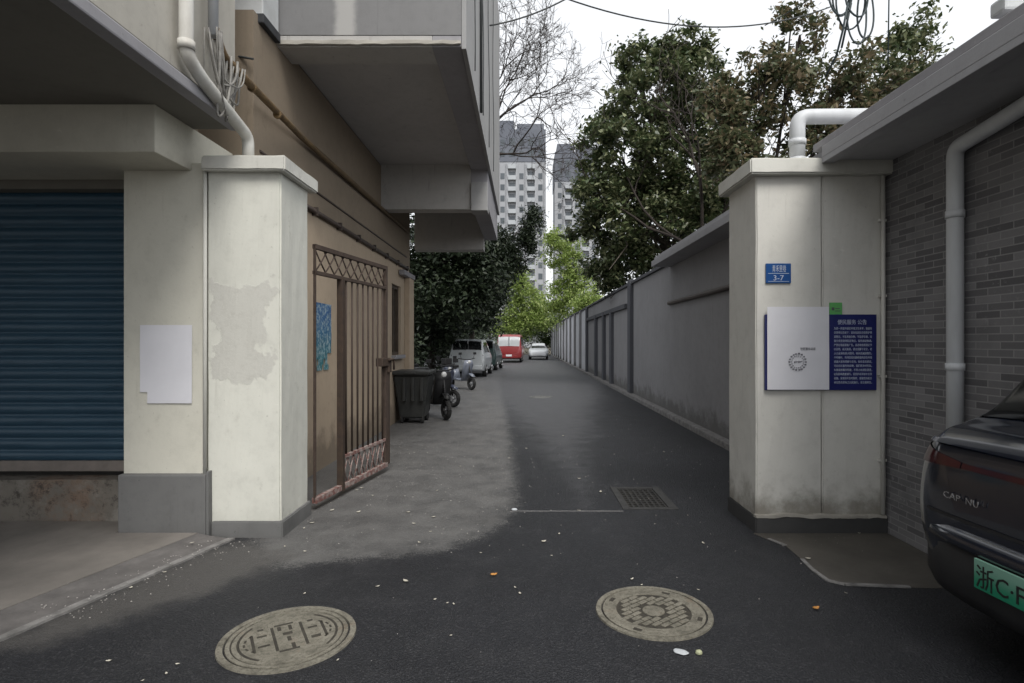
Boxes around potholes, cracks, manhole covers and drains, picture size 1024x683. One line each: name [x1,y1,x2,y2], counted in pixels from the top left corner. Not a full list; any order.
drain grate [610,487,679,510]
manhole cover [596,586,714,642]
manhole cover [215,606,356,675]
